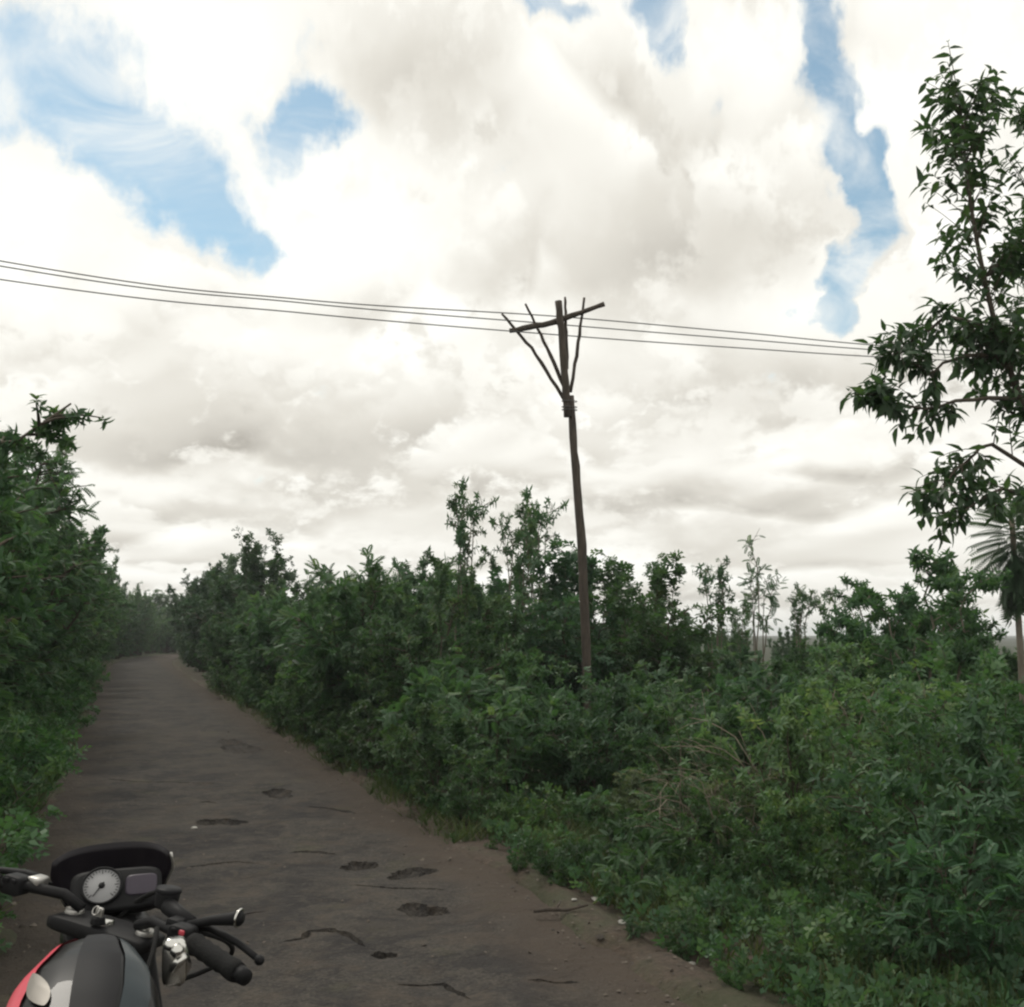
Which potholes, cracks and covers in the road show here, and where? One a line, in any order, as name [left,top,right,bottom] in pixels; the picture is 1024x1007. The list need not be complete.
pothole [387,867,439,880]
crack [308,806,356,814]
pothole [261,789,293,799]
pothole [195,818,249,826]
pothole [340,861,379,871]
crack [282,928,366,947]
crack [397,983,472,1000]
pothole [218,739,265,754]
pothole [370,951,398,959]
pothole [397,902,451,917]
